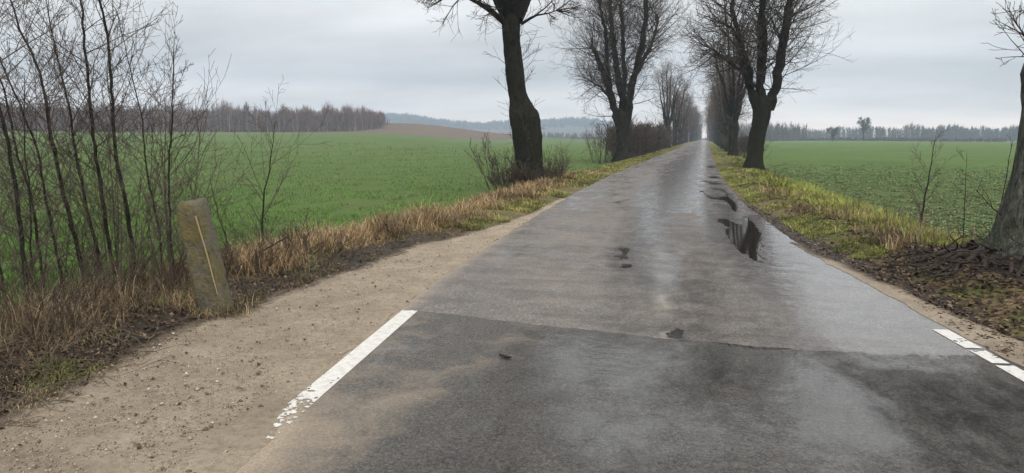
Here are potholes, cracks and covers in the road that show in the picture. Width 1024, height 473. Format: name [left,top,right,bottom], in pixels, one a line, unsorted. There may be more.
pothole [613,248,631,260]
pothole [699,188,739,213]
pothole [665,328,685,339]
pothole [717,215,766,264]
